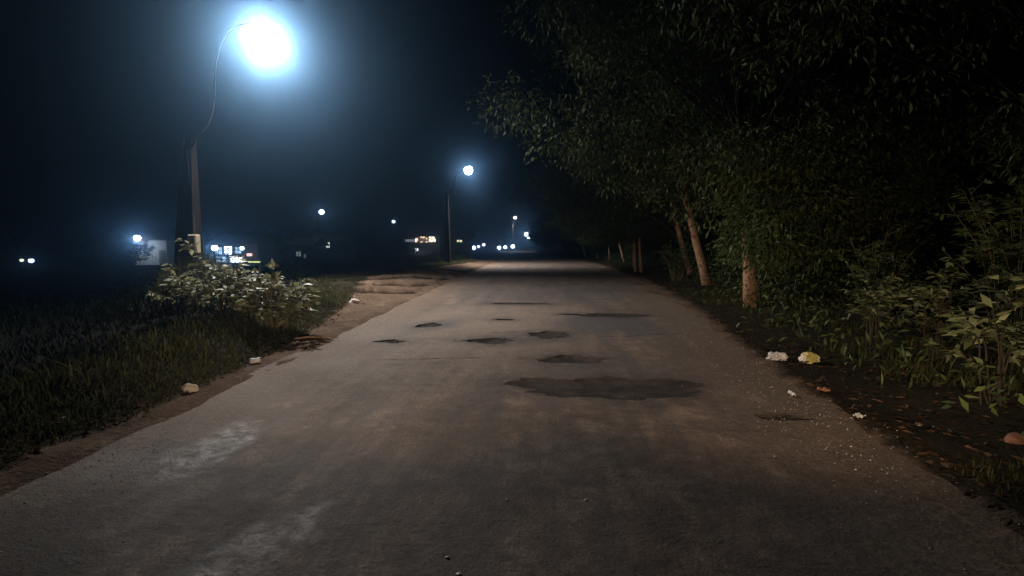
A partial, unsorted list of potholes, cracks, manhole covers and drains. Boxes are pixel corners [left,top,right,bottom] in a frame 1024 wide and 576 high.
pothole [527,331,571,339]
pothole [505,376,705,401]
pothole [753,412,817,421]
pothole [536,355,606,364]
